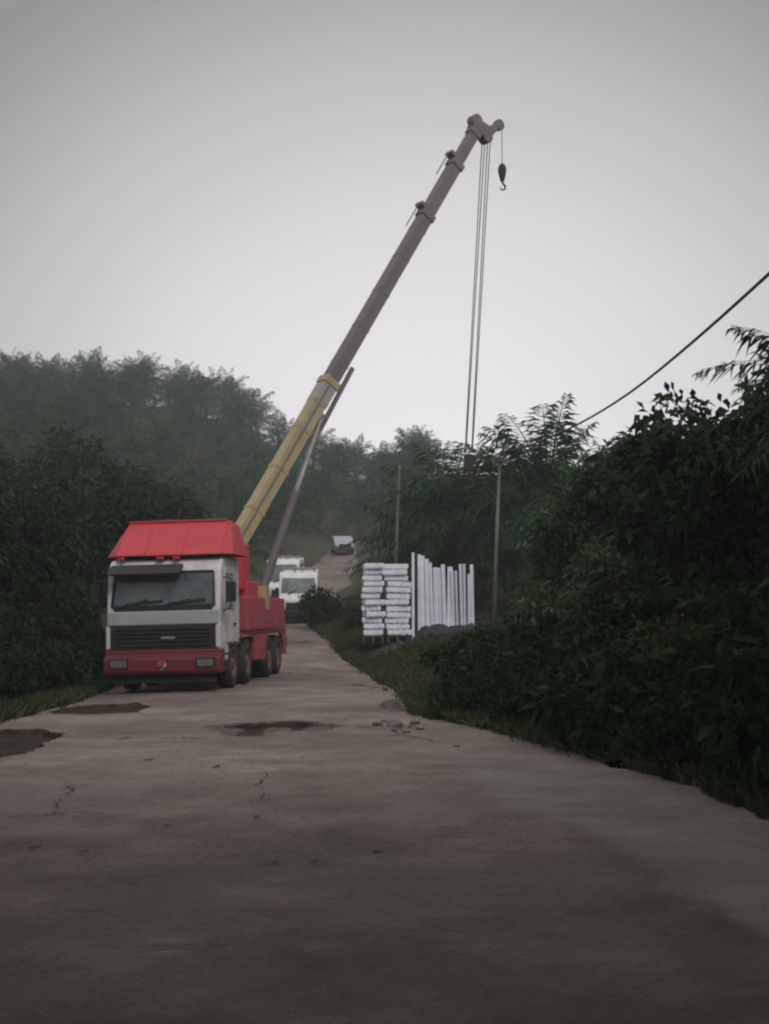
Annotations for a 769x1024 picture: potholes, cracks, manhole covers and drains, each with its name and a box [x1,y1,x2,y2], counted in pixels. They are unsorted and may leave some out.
crack [7,770,112,818]
pothole [196,719,353,738]
crack [352,724,440,743]
pothole [0,728,70,761]
crack [238,757,282,808]
pothole [40,702,159,715]
